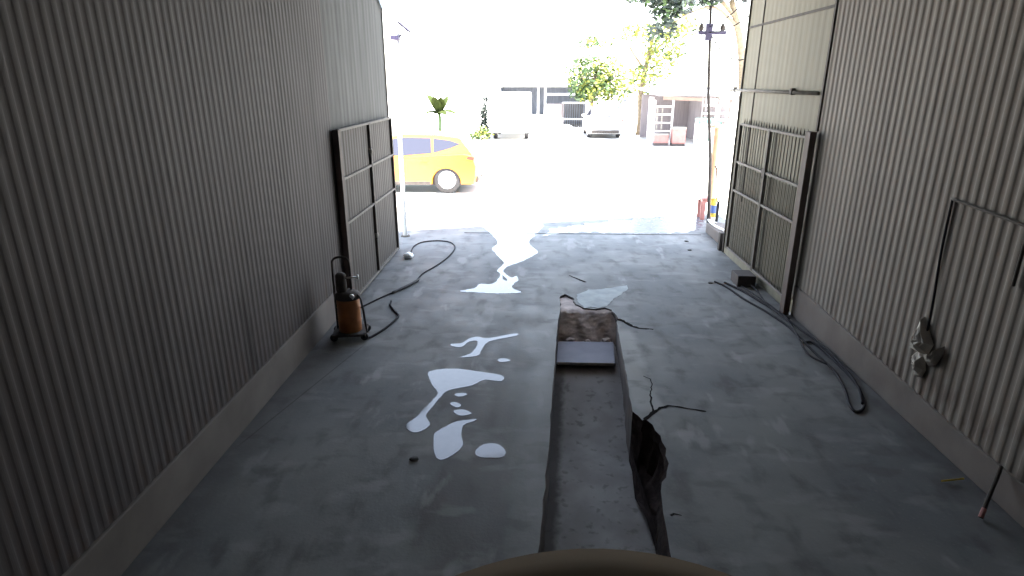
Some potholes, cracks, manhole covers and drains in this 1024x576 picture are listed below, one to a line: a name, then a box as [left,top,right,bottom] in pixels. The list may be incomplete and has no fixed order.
pothole [630,412,669,536]
crack [617,319,653,330]
crack [643,376,706,420]
